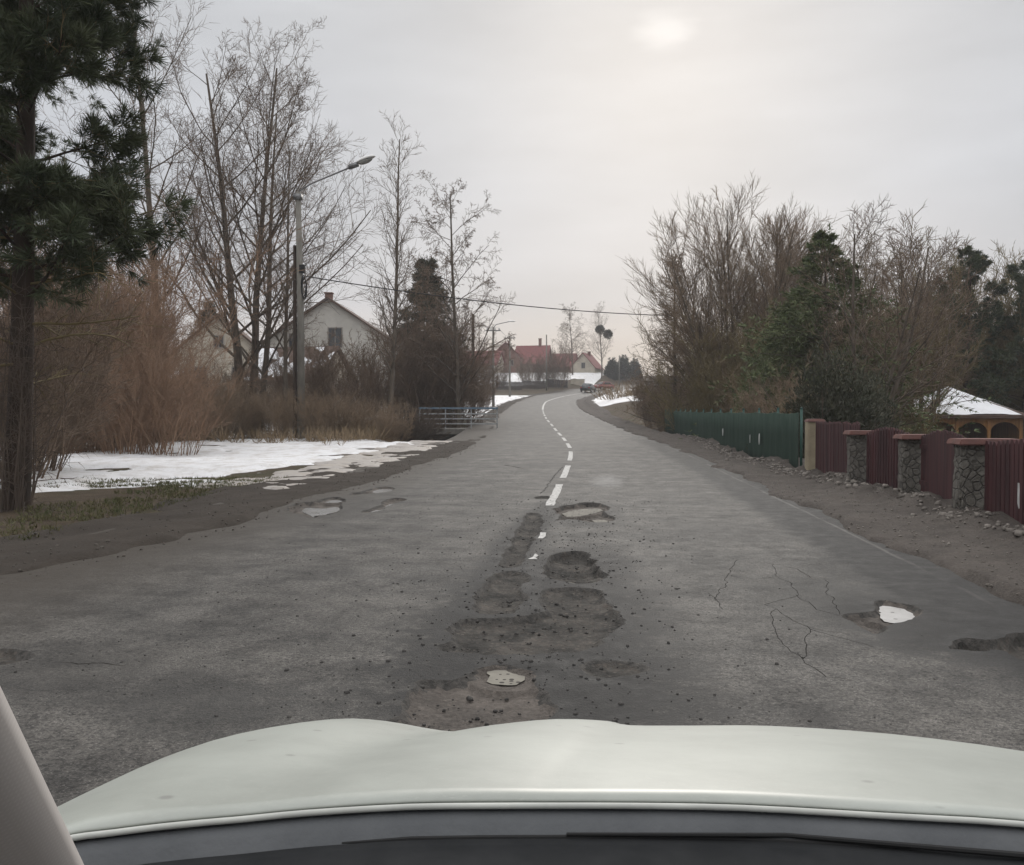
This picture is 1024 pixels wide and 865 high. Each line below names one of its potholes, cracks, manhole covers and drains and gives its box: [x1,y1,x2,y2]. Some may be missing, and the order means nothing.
pothole [542,551,610,583]
pothole [436,587,626,655]
pothole [948,633,1024,661]
pothole [286,497,346,518]
pothole [361,498,407,513]
pothole [841,600,924,634]
pothole [553,502,616,522]
pothole [386,664,559,731]
pothole [0,648,36,665]
pothole [497,513,545,568]
pothole [470,571,532,615]
crack [712,561,840,677]
